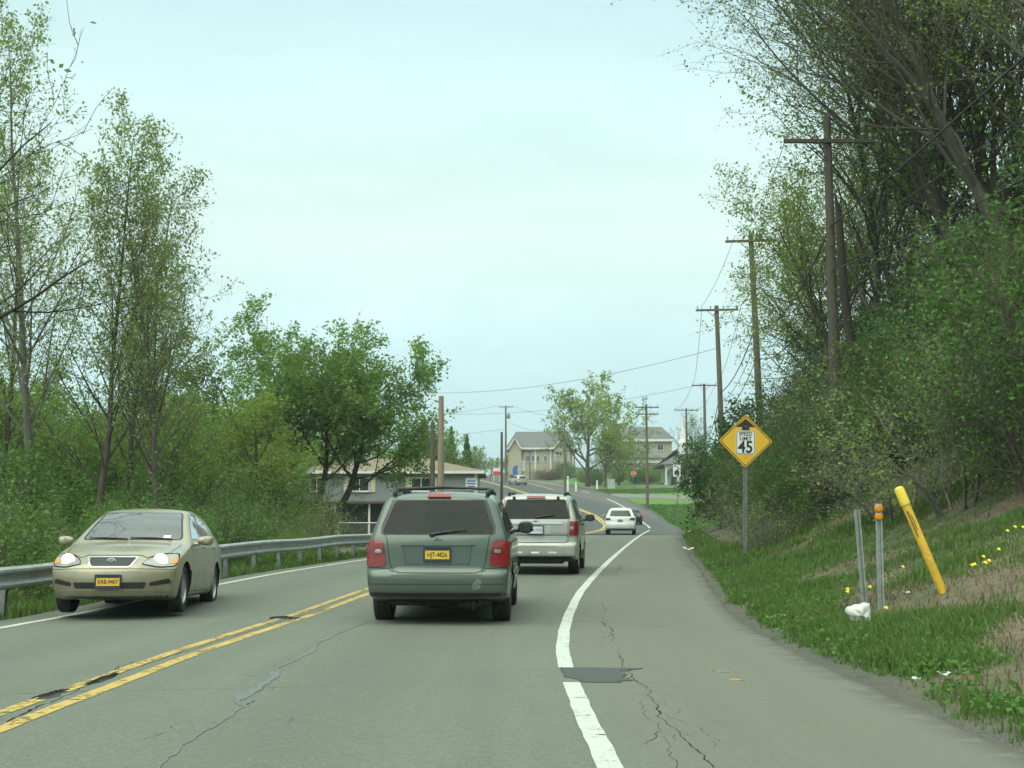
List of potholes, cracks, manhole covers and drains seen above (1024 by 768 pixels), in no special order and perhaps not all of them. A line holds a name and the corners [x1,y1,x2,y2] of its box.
crack [28,565,758,768]
